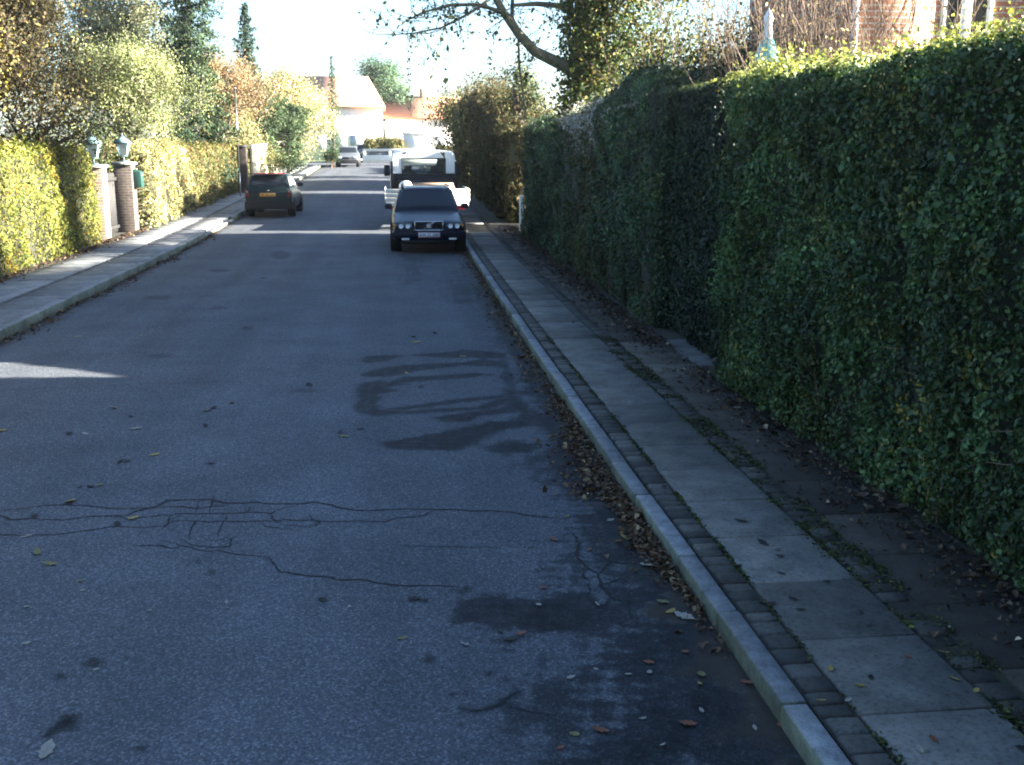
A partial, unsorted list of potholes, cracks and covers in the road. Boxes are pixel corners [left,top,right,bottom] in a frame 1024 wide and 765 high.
crack [0,496,561,589]
crack [566,529,632,628]
